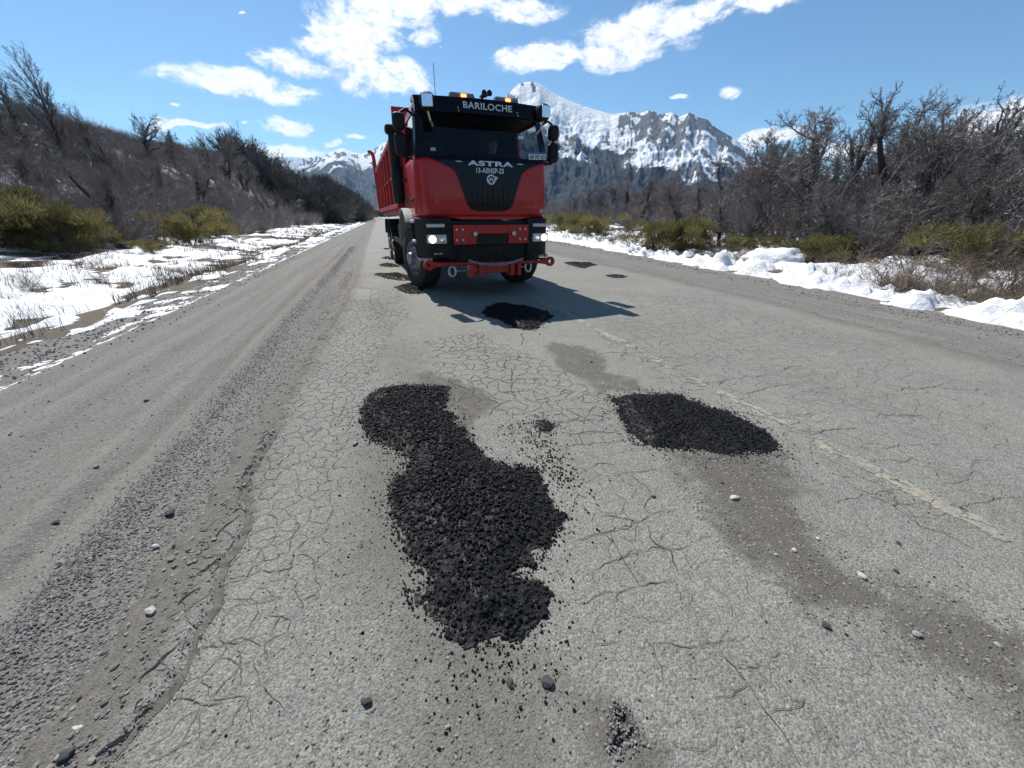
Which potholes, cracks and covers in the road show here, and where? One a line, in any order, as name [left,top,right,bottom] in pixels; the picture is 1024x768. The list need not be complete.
crack [608,292,1023,514]
crack [95,299,398,767]
crack [368,288,409,321]
pothole [605,698,646,761]
crack [426,334,917,764]
